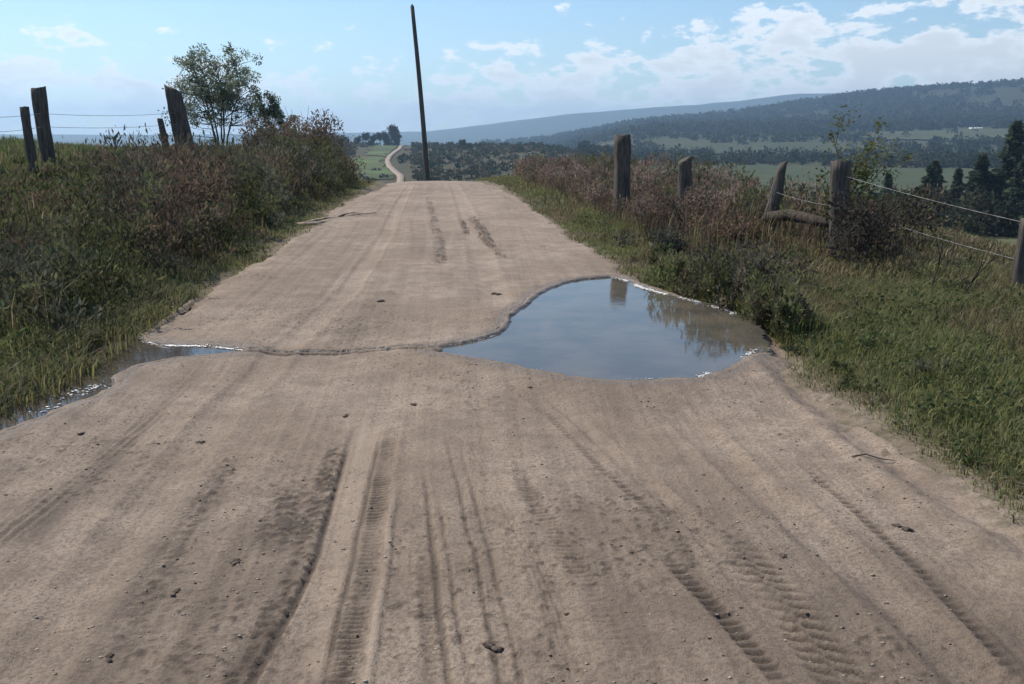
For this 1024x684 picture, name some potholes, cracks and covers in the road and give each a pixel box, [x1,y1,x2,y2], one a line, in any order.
pothole [0,297,257,435]
pothole [425,275,774,383]
